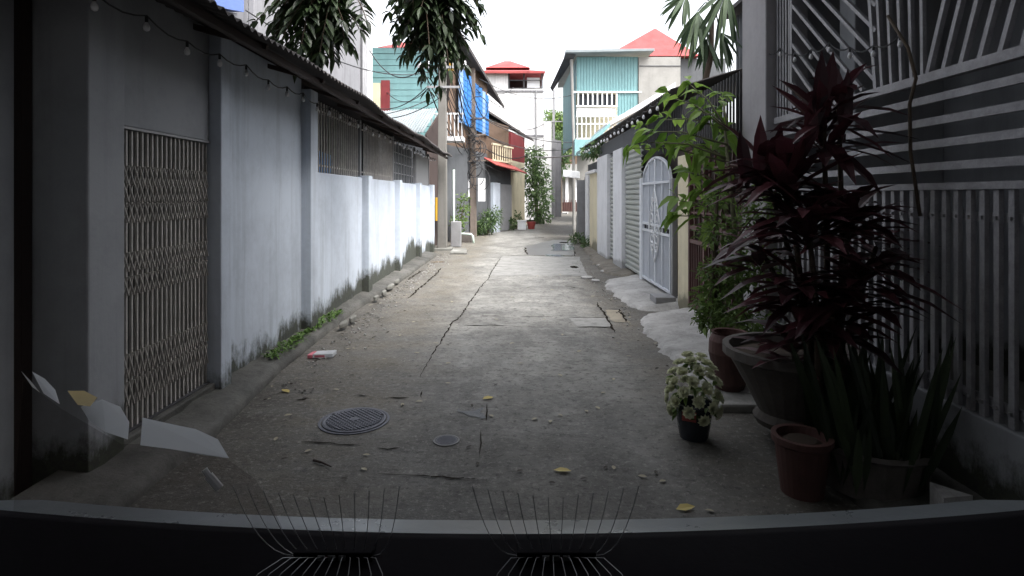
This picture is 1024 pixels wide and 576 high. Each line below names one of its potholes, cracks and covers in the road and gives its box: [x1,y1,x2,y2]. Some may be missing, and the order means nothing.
crack [567,286,627,332]
manhole cover [433,434,460,446]
manhole cover [318,407,390,435]
crack [388,259,500,398]
